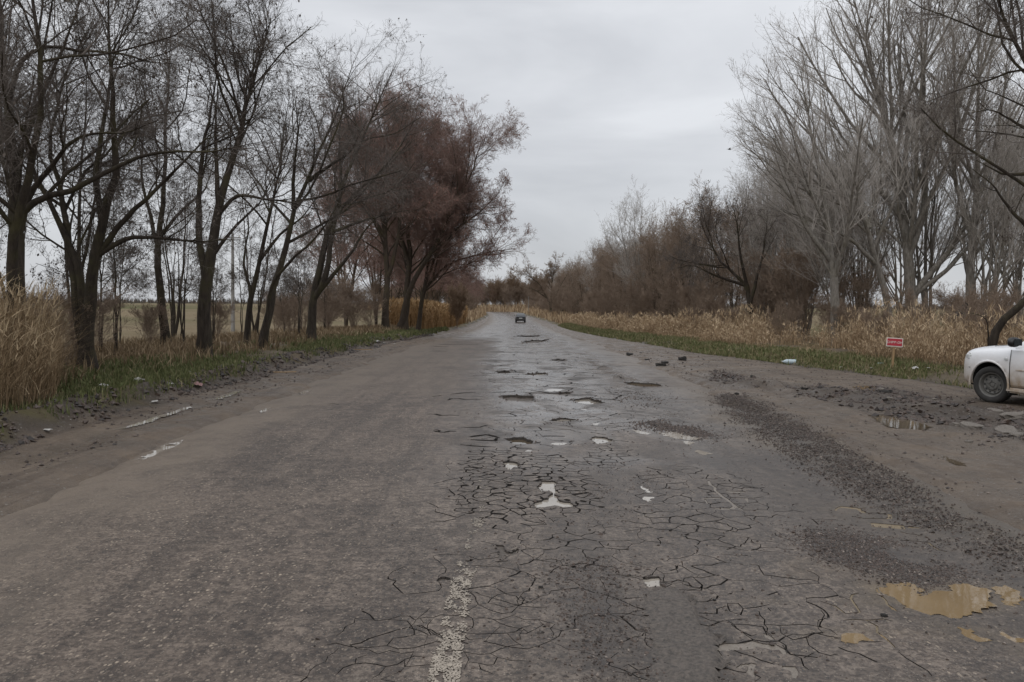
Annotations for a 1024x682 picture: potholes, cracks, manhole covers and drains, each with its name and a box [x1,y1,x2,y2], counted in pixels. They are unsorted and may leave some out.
pothole [533,480,573,508]
pothole [642,576,662,587]
pothole [504,437,533,445]
crack [284,341,947,682]
pothole [591,436,613,444]
